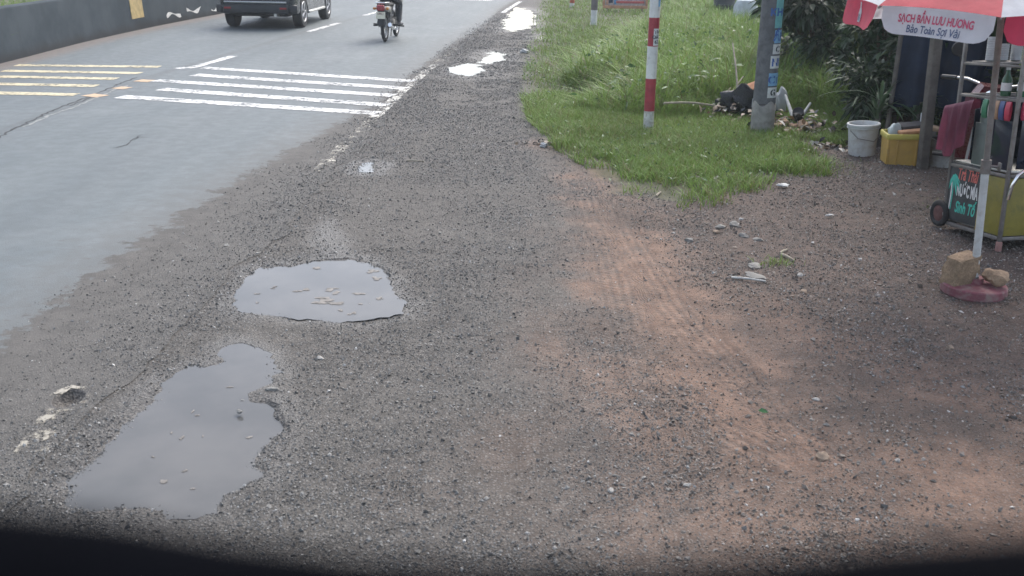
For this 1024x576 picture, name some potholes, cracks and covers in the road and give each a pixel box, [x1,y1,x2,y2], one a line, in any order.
pothole [476,50,508,64]
pothole [351,160,383,174]
pothole [497,7,541,32]
pothole [447,63,485,77]
pothole [229,257,407,323]
crack [0,77,137,138]
pothole [43,342,291,520]
